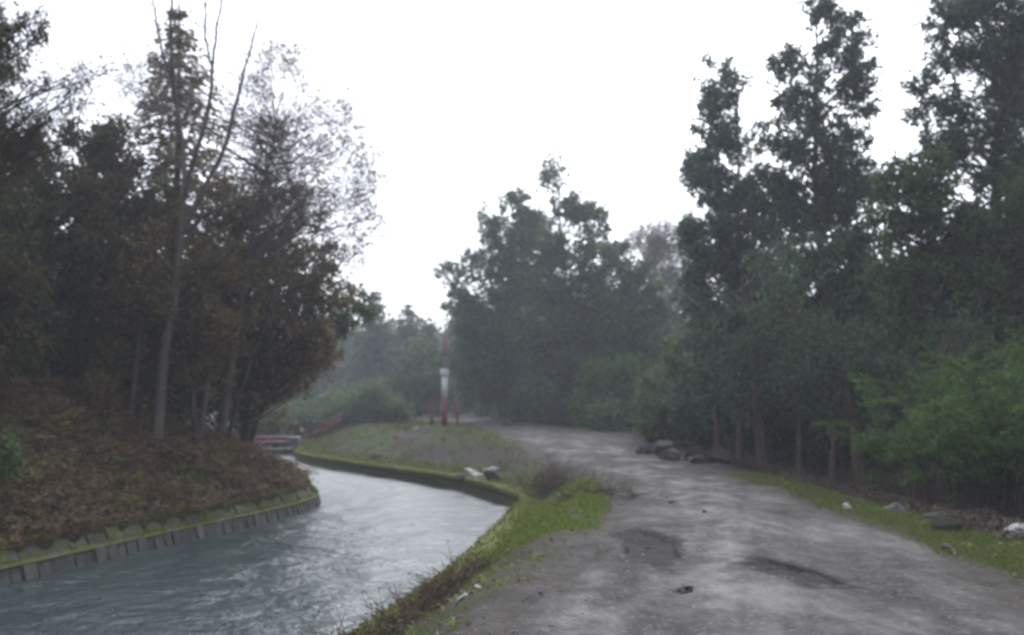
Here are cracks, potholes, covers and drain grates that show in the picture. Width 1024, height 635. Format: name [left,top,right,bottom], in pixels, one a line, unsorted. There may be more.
pothole [609,527,689,573]
pothole [738,555,857,591]
